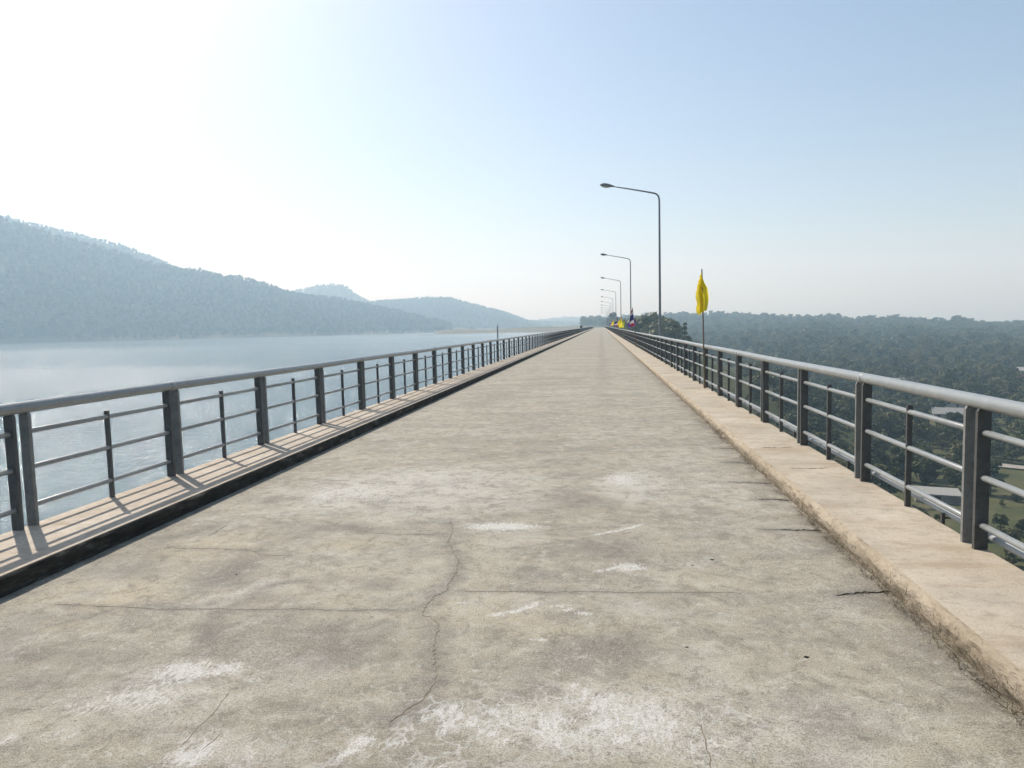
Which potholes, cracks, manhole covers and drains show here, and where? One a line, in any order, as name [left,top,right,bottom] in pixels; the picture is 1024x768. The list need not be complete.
crack [701,725,712,768]
crack [391,521,733,722]
